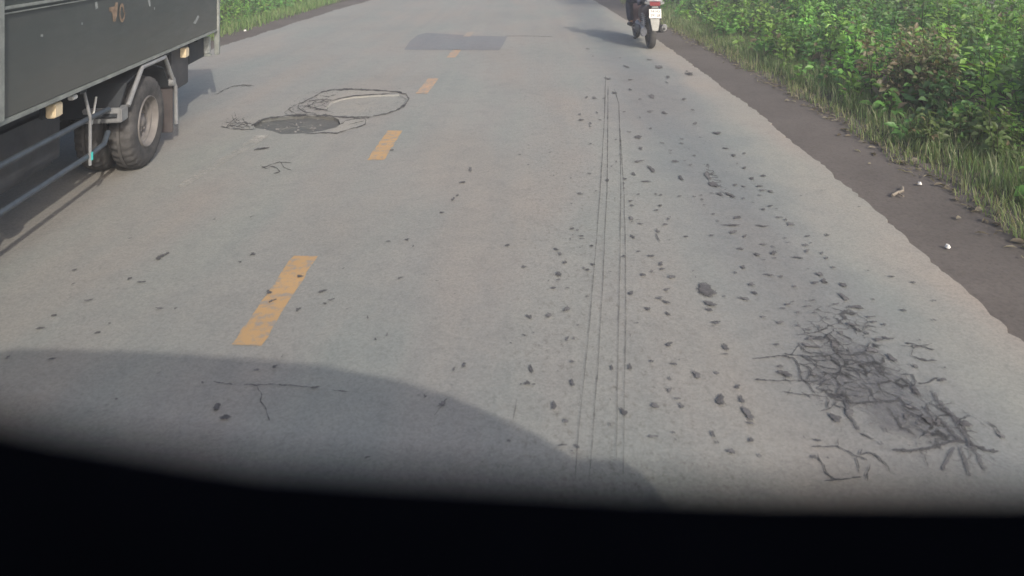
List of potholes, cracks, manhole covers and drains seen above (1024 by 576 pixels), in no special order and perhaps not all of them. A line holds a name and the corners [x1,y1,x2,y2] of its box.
crack [214,381,307,421]
crack [221,88,409,134]
crack [254,147,292,173]
crack [752,325,1000,481]
pothole [254,116,340,134]
